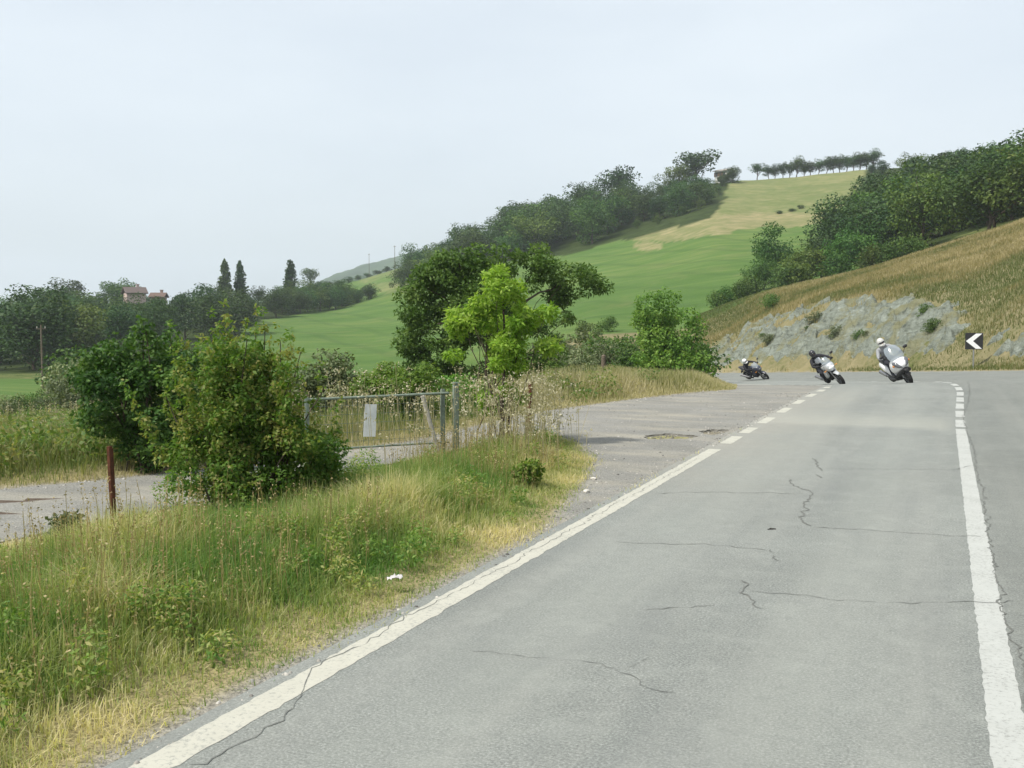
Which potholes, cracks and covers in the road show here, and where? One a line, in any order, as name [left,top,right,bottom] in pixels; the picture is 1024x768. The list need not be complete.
crack [200,458,996,764]
